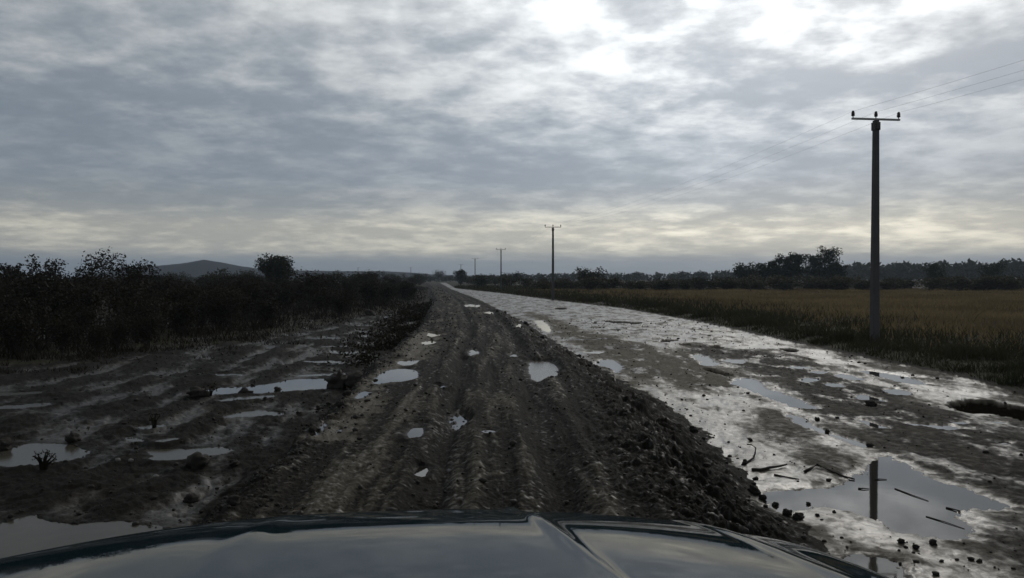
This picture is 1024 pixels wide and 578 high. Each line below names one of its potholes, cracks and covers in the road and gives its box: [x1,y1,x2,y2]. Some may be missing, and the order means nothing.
pothole [524,357,561,382]
pothole [728,376,825,409]
pothole [444,409,472,431]
pothole [751,451,1024,542]
pothole [404,424,426,438]
pothole [590,358,626,373]
pothole [367,366,422,384]
pothole [941,397,1024,422]
